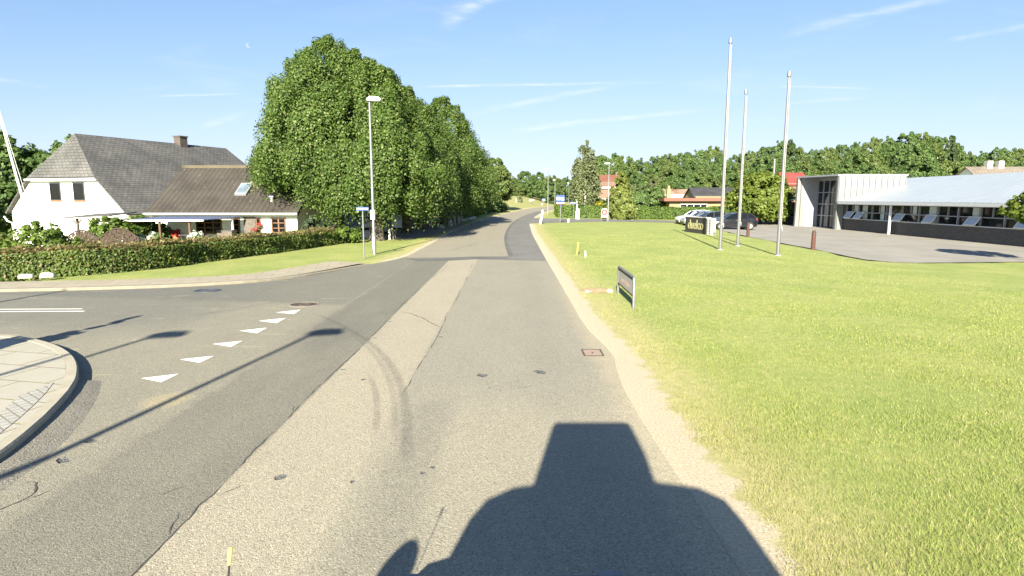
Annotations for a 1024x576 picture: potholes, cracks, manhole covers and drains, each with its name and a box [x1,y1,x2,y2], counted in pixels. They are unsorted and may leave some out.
crack [1,482,52,509]
